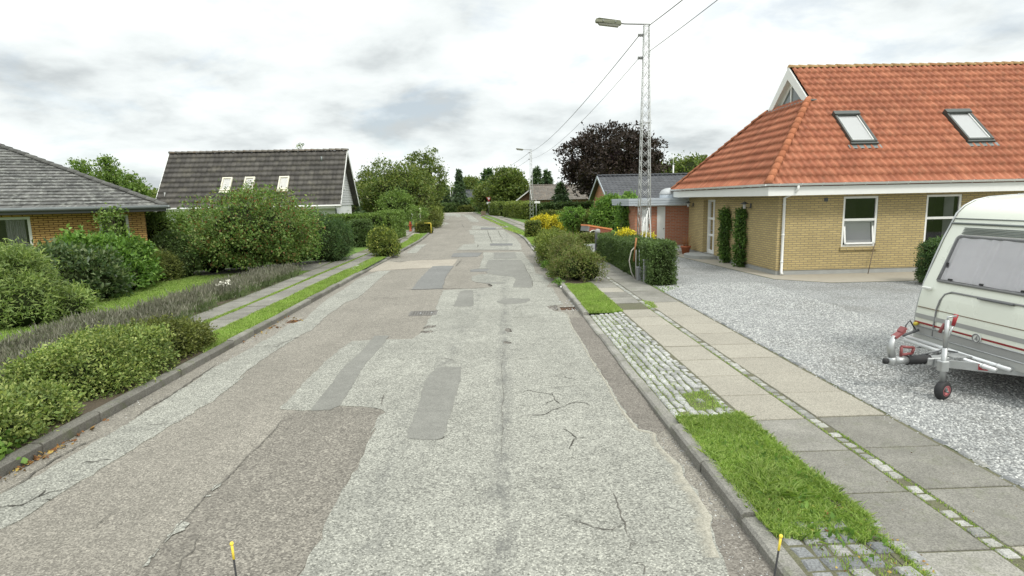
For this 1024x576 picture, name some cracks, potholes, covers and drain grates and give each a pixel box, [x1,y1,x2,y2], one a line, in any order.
crack [521,376,589,458]
crack [574,490,645,572]
crack [0,488,67,507]
